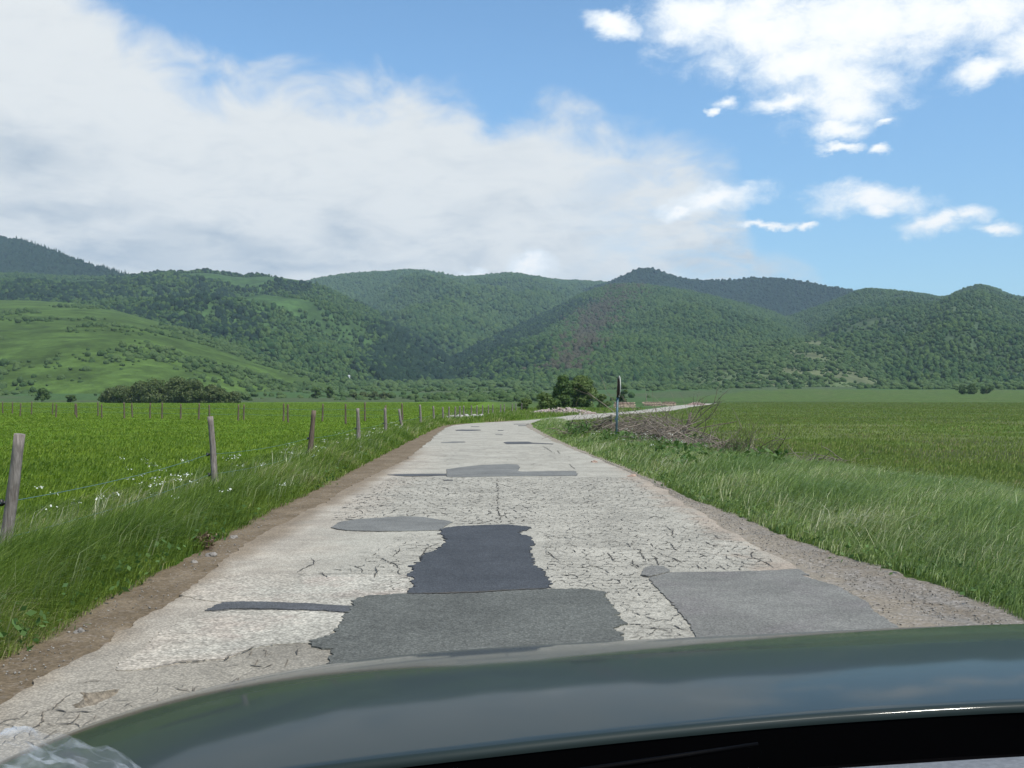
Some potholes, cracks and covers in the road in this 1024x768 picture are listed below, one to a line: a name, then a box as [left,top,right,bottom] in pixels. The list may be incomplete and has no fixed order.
crack [299,448,783,640]
crack [0,644,299,745]
